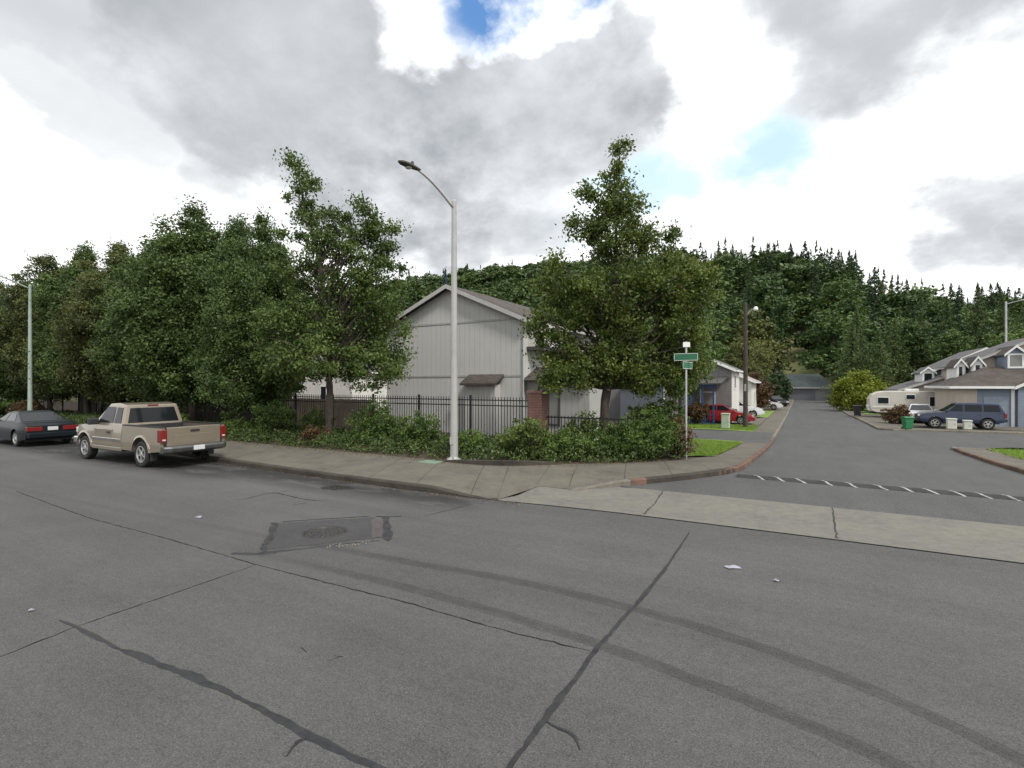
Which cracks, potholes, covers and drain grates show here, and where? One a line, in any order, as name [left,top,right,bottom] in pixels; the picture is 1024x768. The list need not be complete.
crack [0,491,590,657]
manhole cover [301,526,348,539]
